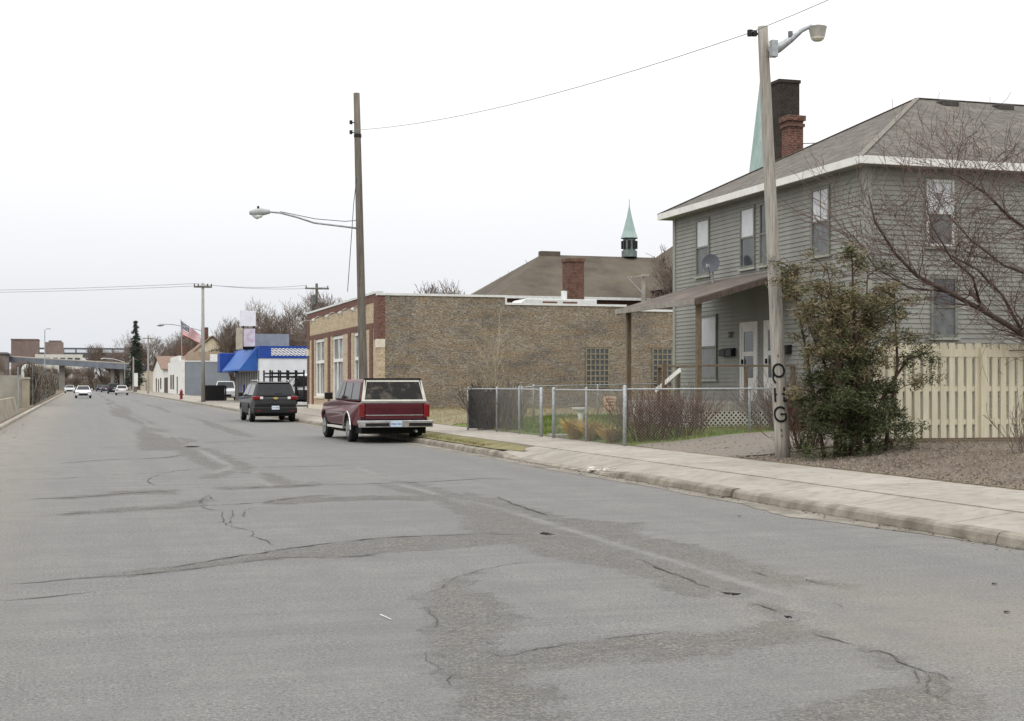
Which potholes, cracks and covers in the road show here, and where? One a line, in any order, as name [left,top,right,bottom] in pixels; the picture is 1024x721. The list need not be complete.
crack [860,649,964,705]
crack [640,559,784,614]
crack [2,438,515,600]
